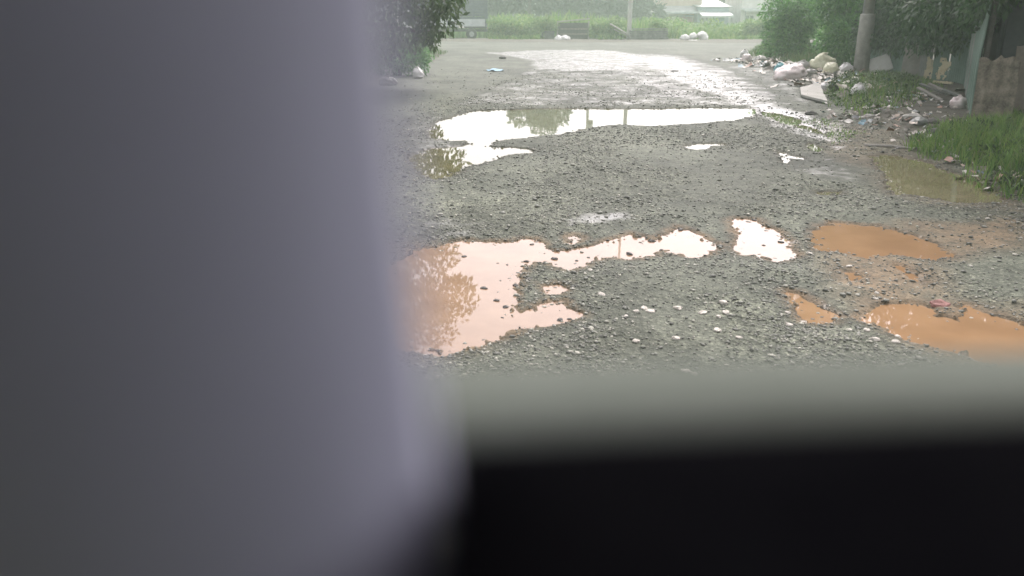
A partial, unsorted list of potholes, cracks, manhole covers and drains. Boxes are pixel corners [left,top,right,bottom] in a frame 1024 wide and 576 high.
pothole [775,287,847,327]
pothole [843,297,1024,354]
pothole [721,215,809,264]
pothole [415,223,730,359]
pothole [406,107,763,180]
pothole [803,219,965,262]
pothole [866,153,1015,205]
